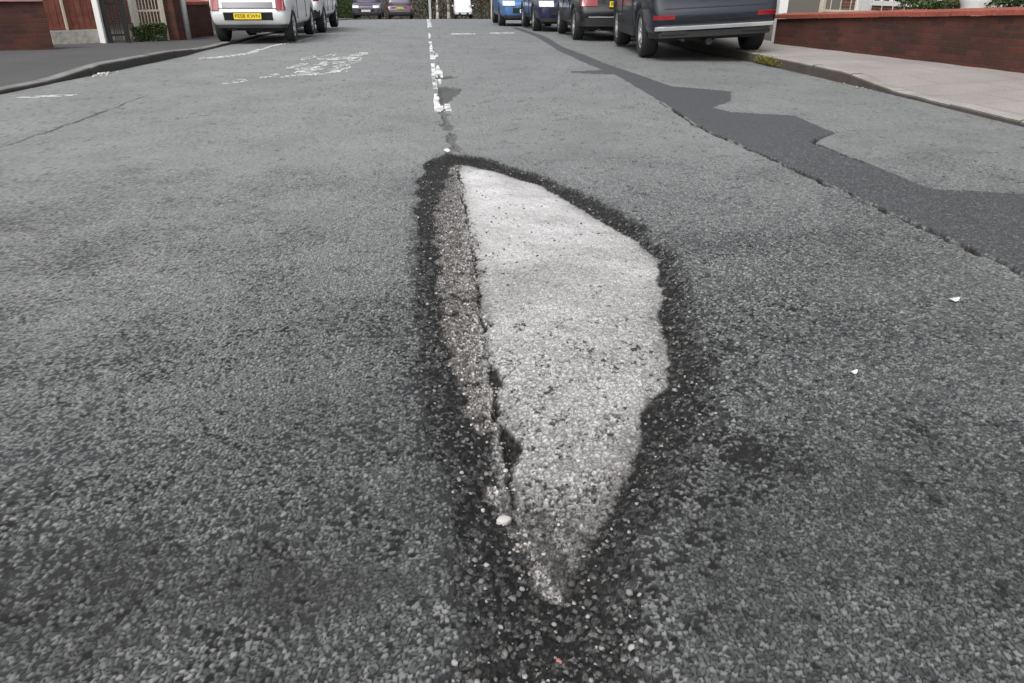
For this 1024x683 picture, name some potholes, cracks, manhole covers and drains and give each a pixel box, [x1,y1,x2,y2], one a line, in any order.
crack [438,103,462,153]
pothole [410,153,725,683]
crack [0,95,148,148]
